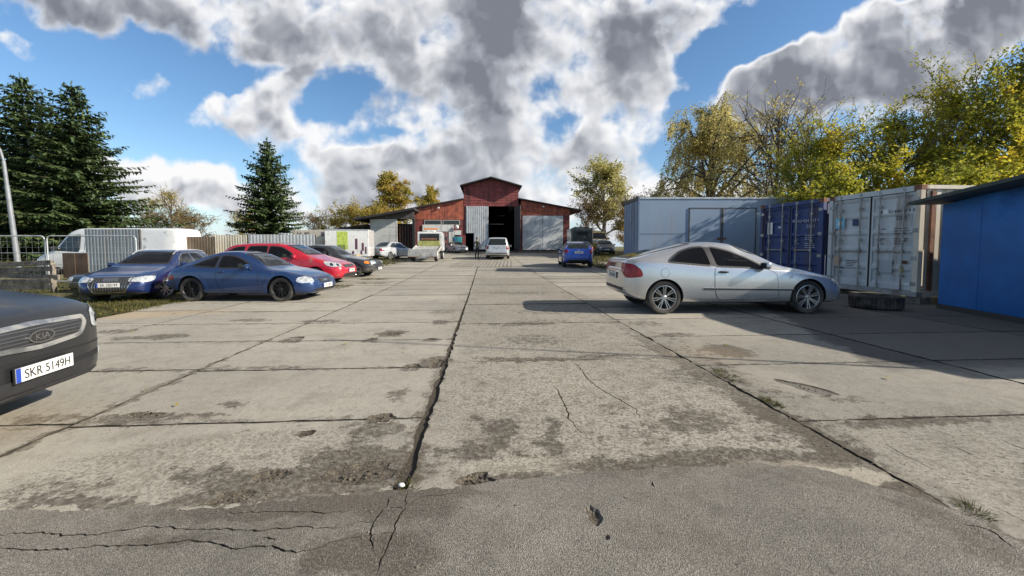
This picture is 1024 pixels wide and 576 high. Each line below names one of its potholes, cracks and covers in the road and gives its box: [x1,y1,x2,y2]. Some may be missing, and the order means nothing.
pothole [294,430,317,438]
pothole [366,413,396,423]
pothole [584,504,603,526]
pothole [454,472,496,486]
crack [577,345,659,413]
crack [0,493,455,575]
pothole [774,379,839,397]
